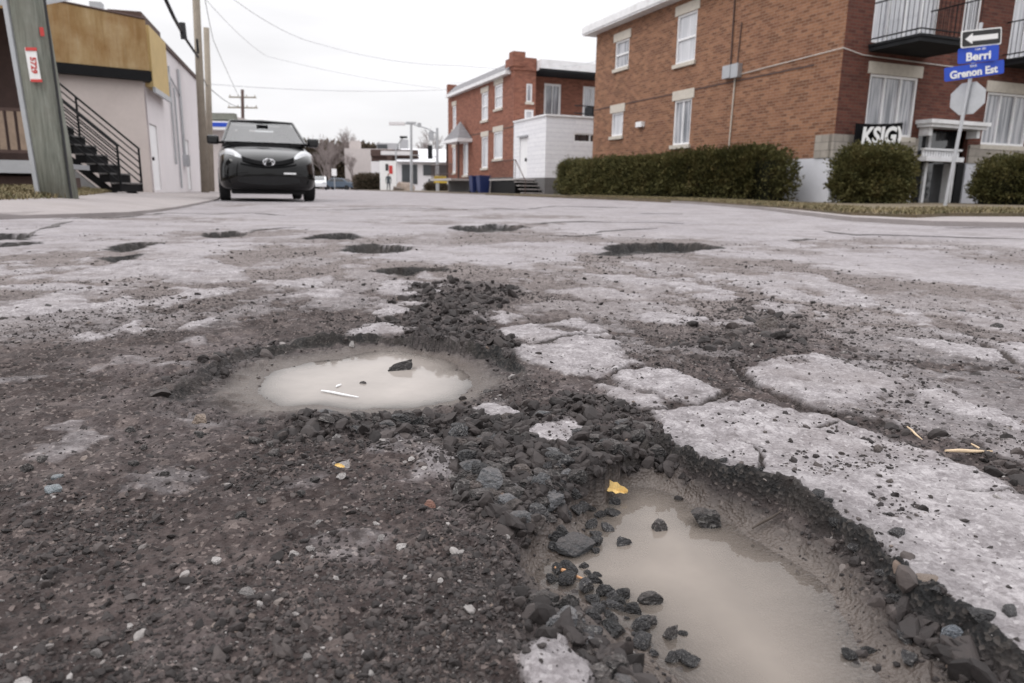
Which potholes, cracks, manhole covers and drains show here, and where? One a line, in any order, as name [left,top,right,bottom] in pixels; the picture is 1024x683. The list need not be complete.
pothole [105,242,162,253]
pothole [341,243,414,254]
crack [587,364,649,383]
crack [500,316,624,344]
pothole [596,242,725,256]
pothole [302,232,365,240]
crack [636,360,1024,472]
pothole [201,230,247,238]
pothole [374,266,451,277]
crack [933,325,1024,367]
pothole [485,430,1024,683]
pothole [449,224,532,233]
